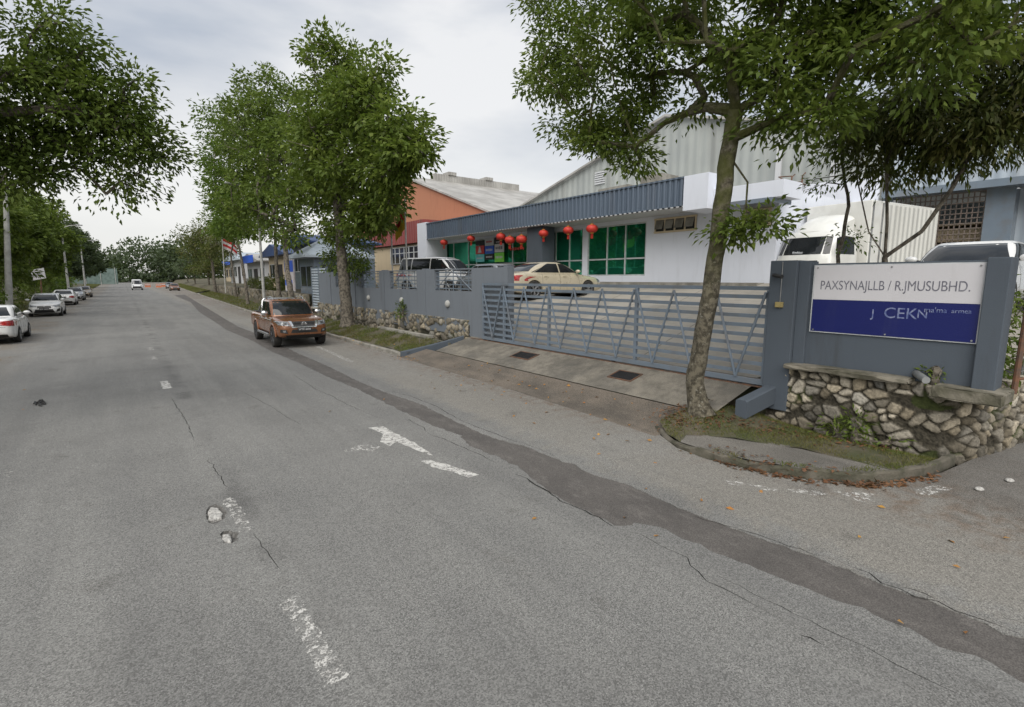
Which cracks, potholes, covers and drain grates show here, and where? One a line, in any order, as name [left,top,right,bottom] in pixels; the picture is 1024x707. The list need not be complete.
pothole [220,531,239,543]
crack [658,544,951,691]
drain grate [510,351,540,360]
pothole [206,504,227,524]
drain grate [607,370,643,382]
